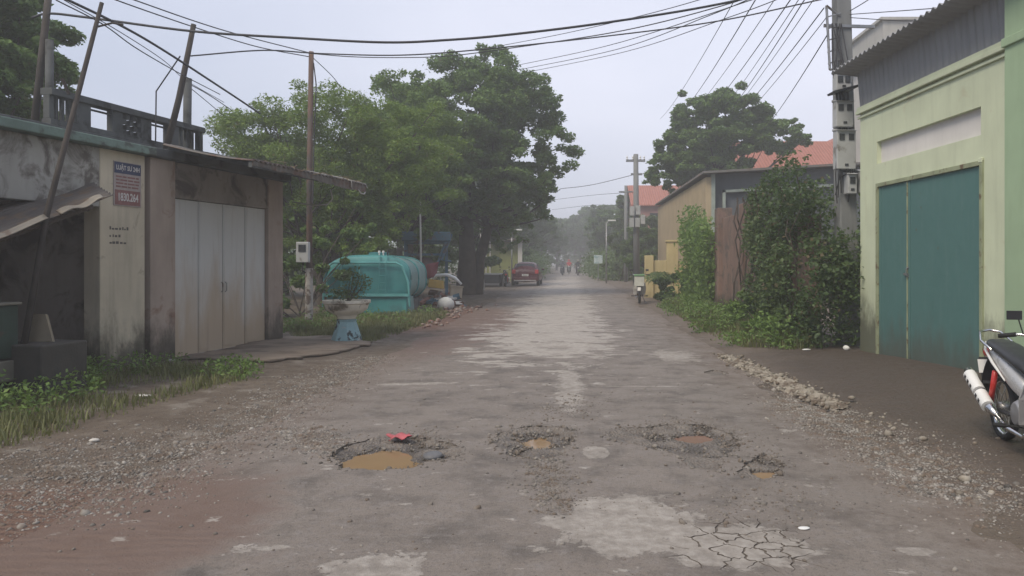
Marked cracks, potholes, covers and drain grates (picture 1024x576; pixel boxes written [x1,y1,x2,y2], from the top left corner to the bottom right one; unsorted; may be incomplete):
pothole [319,434,466,471]
pothole [727,449,796,483]
crack [659,518,828,573]
pothole [479,424,584,460]
pothole [599,421,756,474]
